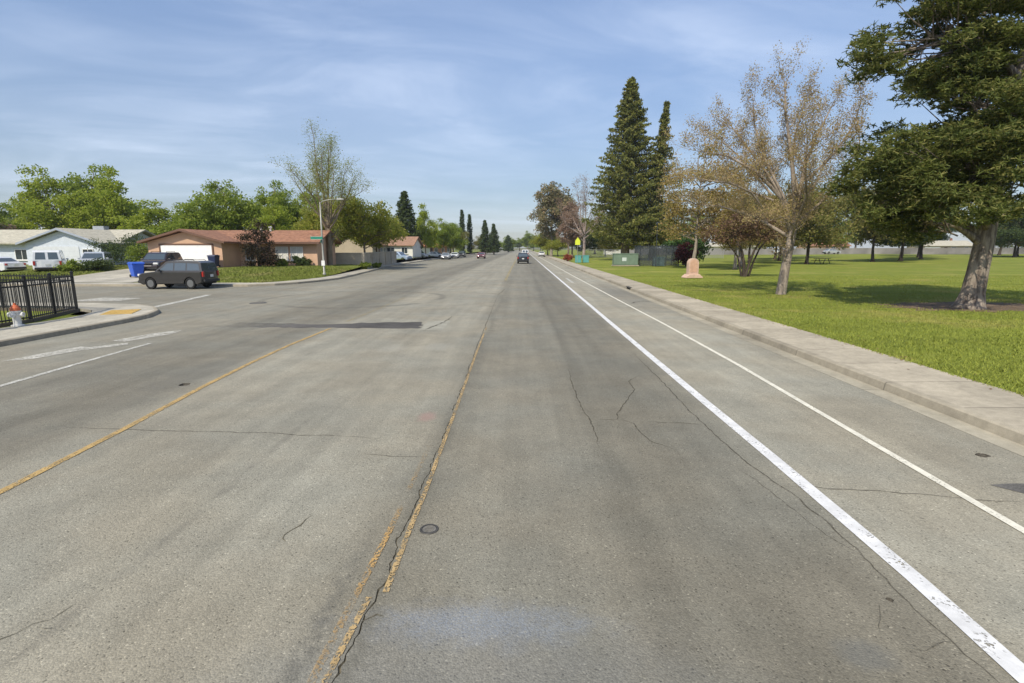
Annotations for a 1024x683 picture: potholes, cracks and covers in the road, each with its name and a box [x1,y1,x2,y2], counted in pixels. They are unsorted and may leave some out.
manhole cover [419,524,439,535]
crack [569,356,1018,680]
crack [71,290,504,683]
